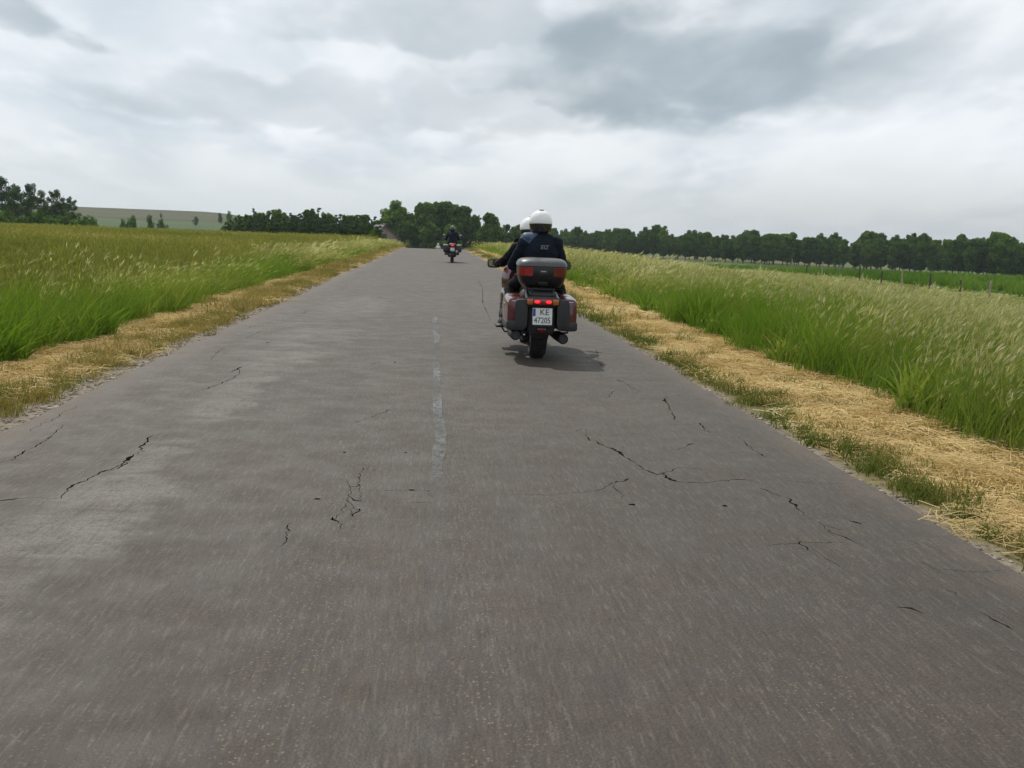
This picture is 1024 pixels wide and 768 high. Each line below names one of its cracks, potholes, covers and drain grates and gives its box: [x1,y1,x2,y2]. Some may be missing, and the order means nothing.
crack [1,433,162,501]
crack [562,429,745,497]
crack [12,407,76,460]
crack [331,468,364,529]
crack [763,481,865,566]
